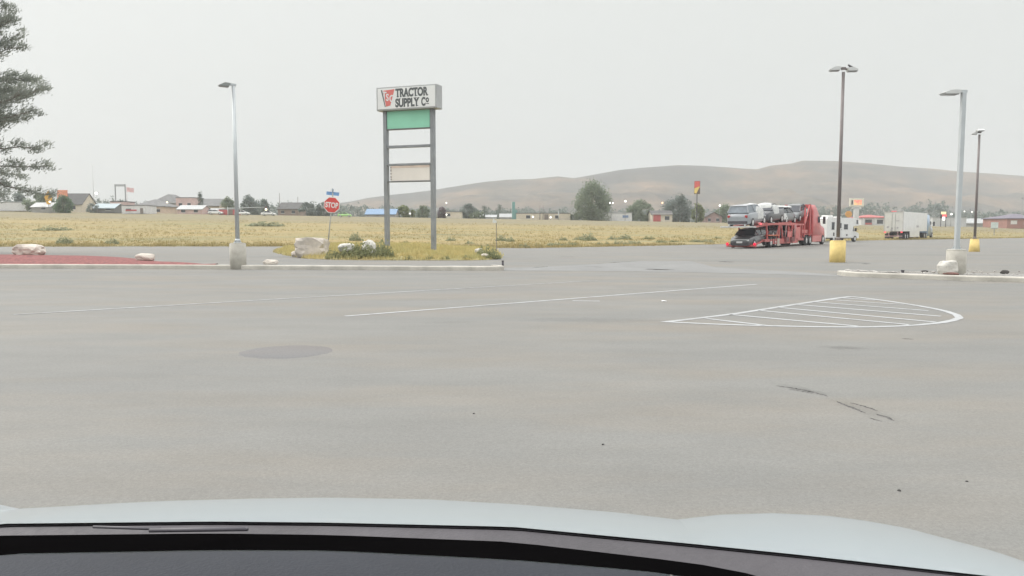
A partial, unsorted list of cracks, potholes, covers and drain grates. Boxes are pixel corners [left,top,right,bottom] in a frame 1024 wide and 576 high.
crack [780,386,894,421]
